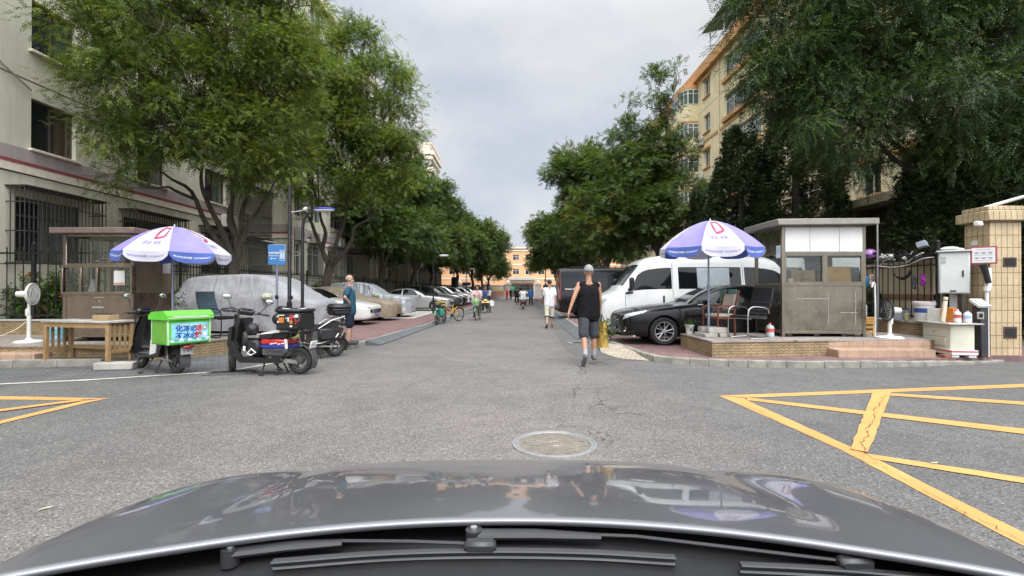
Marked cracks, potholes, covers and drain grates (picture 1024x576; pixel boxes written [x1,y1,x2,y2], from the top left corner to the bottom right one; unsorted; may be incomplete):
crack [568,365,654,417]
manhole cover [512,431,597,459]
